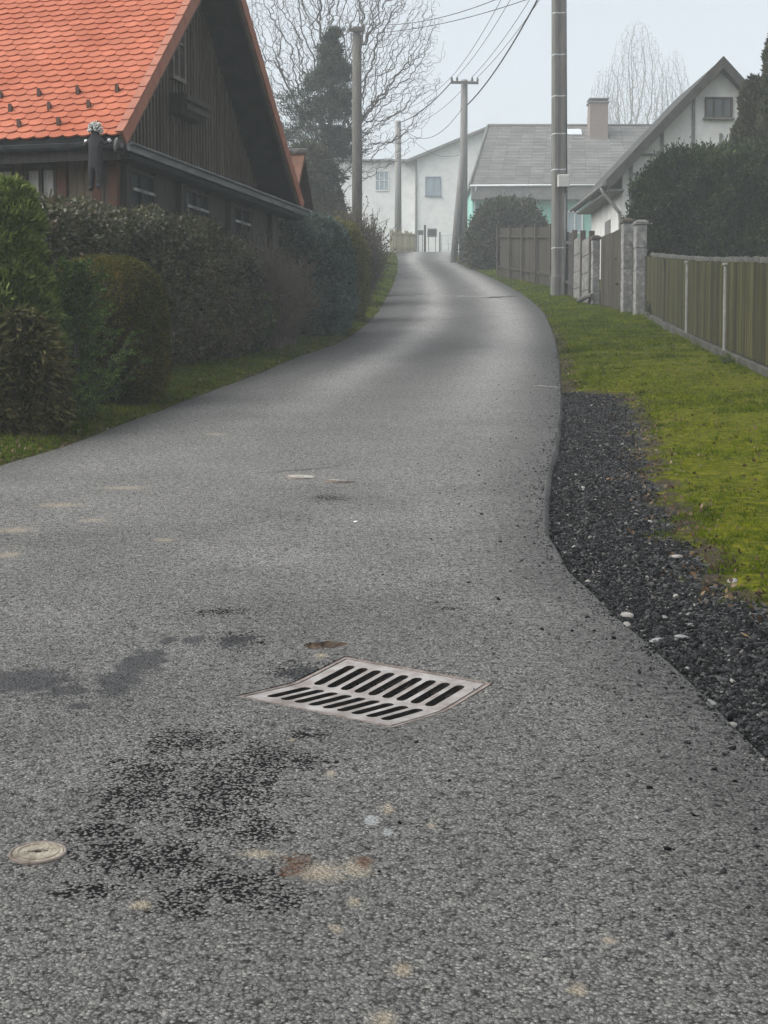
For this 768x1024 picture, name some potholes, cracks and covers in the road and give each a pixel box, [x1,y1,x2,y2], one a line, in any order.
utility cover [8,841,67,865]
drain grate [238,657,492,728]
